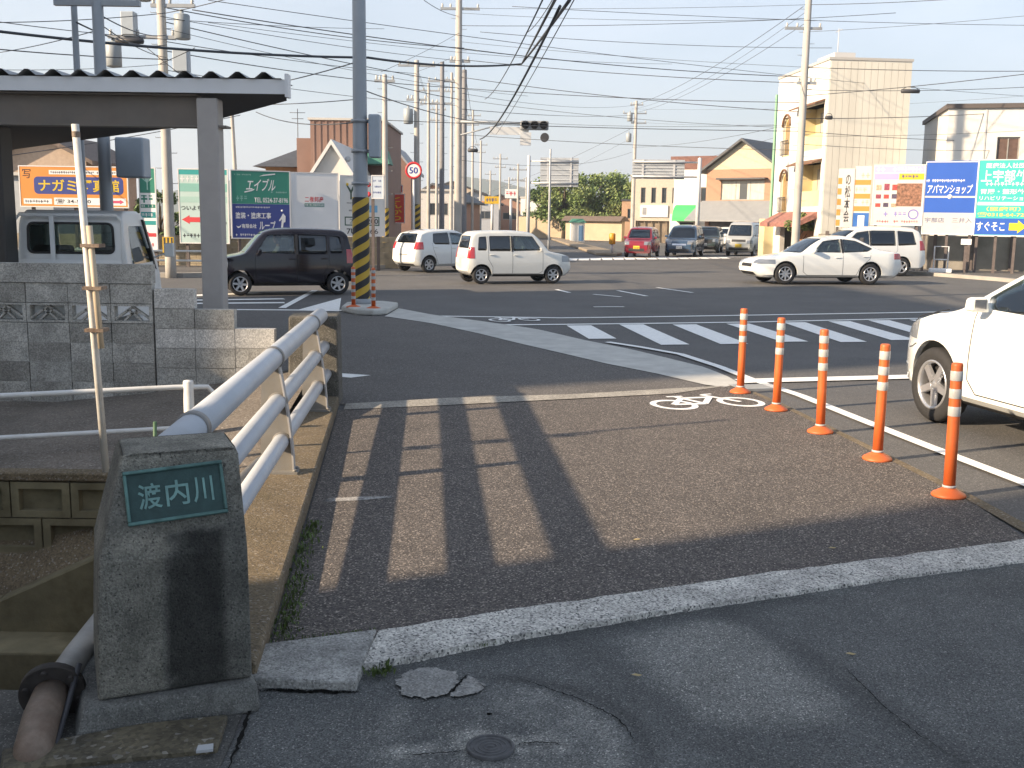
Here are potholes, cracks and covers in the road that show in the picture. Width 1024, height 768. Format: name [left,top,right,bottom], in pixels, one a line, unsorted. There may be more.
crack [228,688,358,768]
crack [843,666,944,751]
manhole cover [466,734,515,761]
